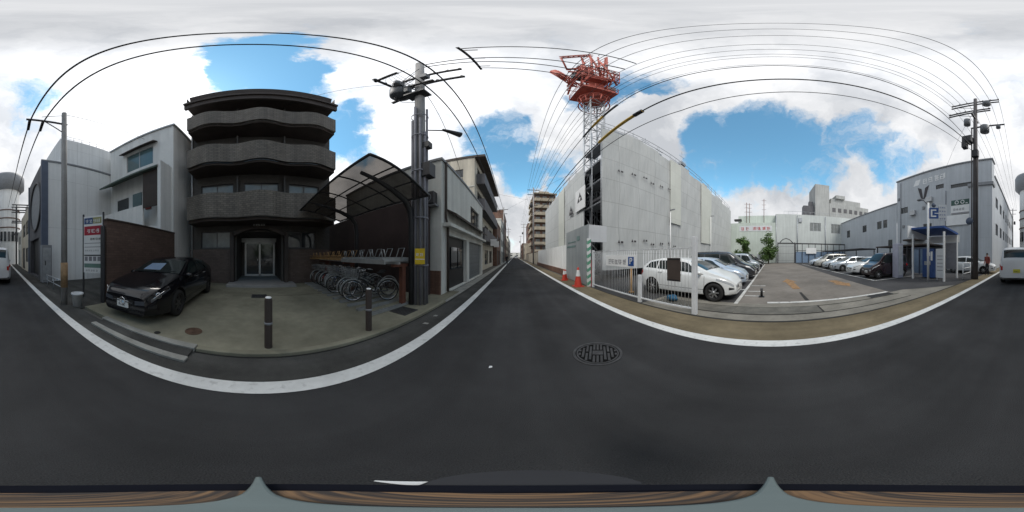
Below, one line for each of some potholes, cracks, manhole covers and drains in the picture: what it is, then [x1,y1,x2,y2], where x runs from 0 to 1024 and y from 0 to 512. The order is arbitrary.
drain grate [390,306,418,316]
manhole cover [573,342,622,366]
